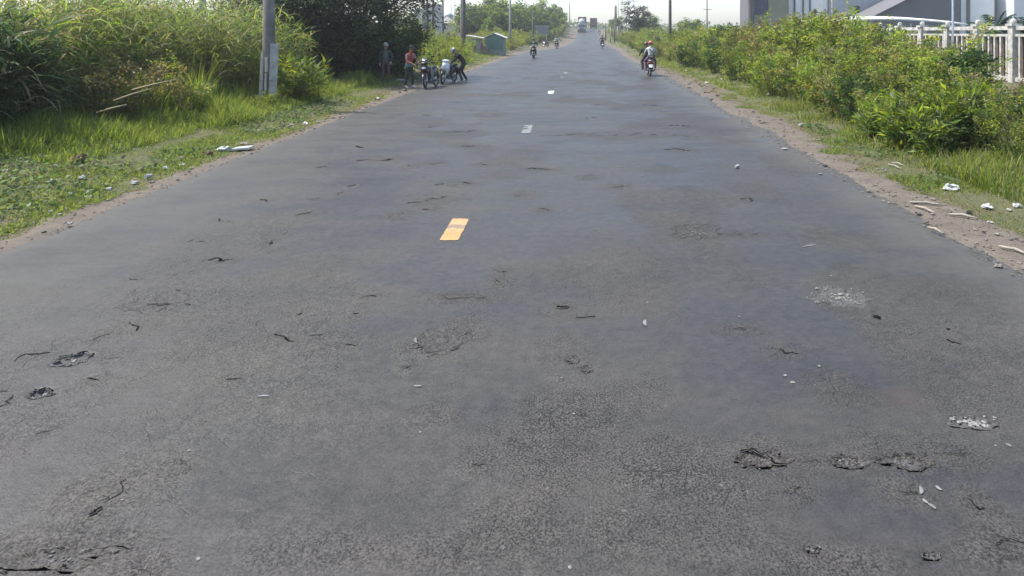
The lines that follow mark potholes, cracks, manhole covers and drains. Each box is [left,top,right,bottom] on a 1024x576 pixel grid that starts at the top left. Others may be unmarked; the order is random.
pothole [921,550,942,561]
pothole [872,453,936,471]
crack [87,479,125,515]
crack [42,547,67,570]
pothole [27,387,56,399]
pothole [805,285,874,308]
pothole [669,223,721,240]
pothole [947,415,1000,430]
pothole [49,351,95,367]
pothole [829,453,871,469]
crack [84,545,147,571]
pothole [731,449,796,469]
